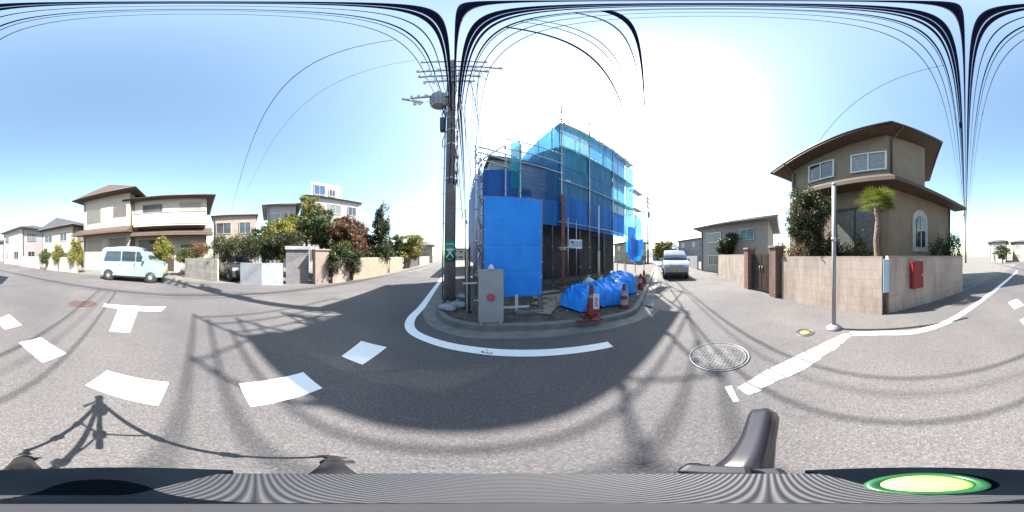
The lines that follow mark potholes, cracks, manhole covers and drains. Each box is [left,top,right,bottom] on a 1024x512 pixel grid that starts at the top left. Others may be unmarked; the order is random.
manhole cover [67,300,98,309]
manhole cover [795,329,815,337]
manhole cover [689,342,751,372]
